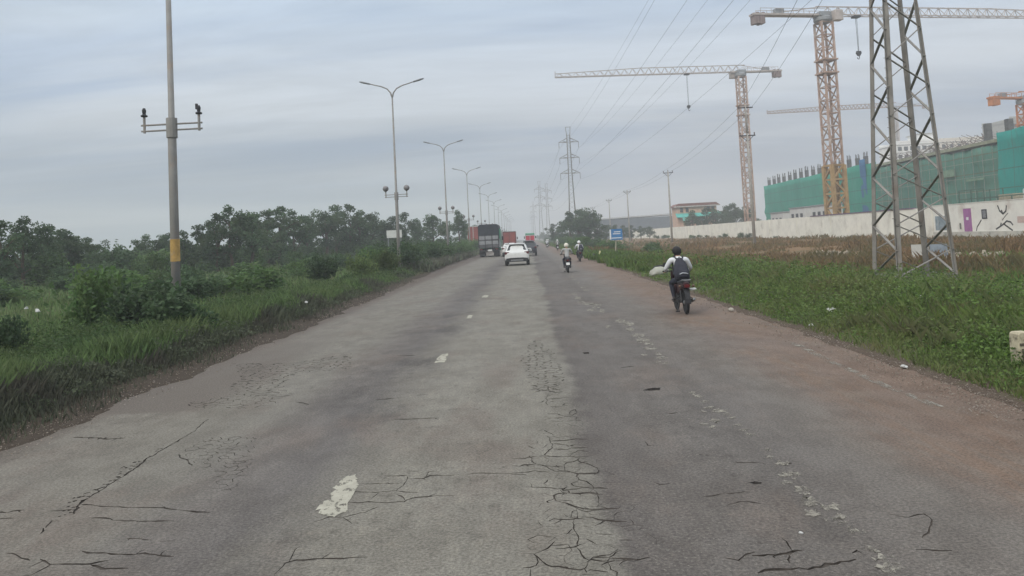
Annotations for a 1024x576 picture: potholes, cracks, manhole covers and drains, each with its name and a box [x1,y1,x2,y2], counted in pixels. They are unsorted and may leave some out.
crack [889,514,952,551]
crack [318,470,452,524]
crack [188,356,351,409]
crack [471,340,657,576]
crack [8,420,256,576]
crack [727,539,861,573]
